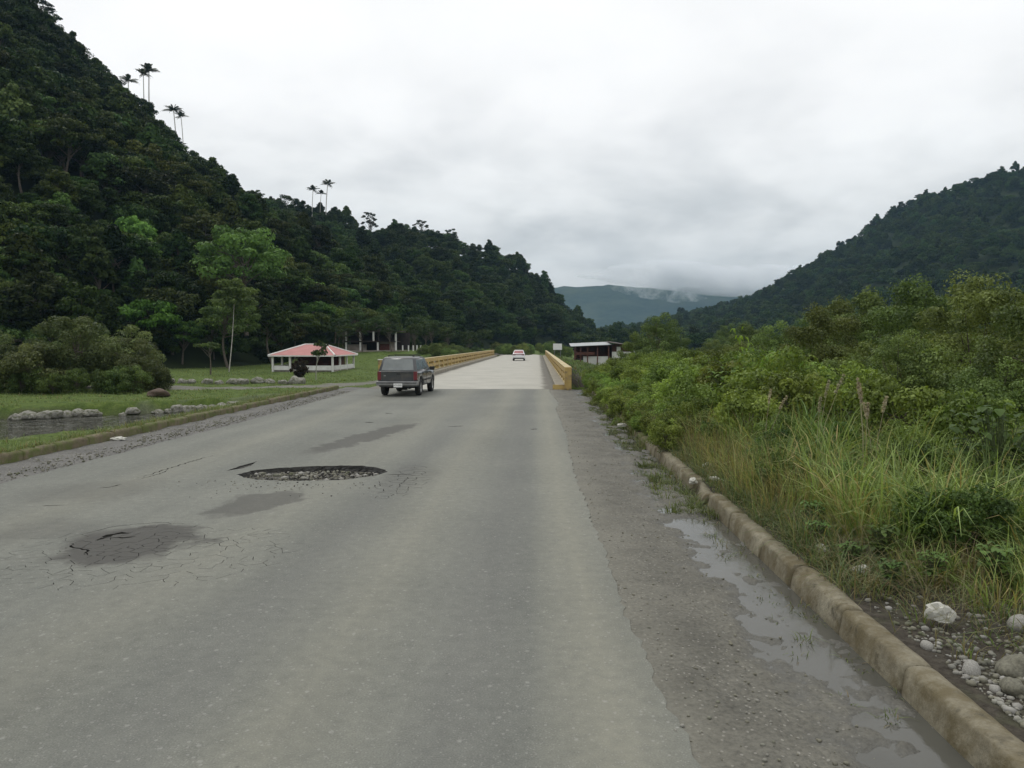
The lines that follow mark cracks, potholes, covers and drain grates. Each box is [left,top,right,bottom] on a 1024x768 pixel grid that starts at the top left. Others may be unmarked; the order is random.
pothole [237,465,388,481]
crack [5,522,299,588]
